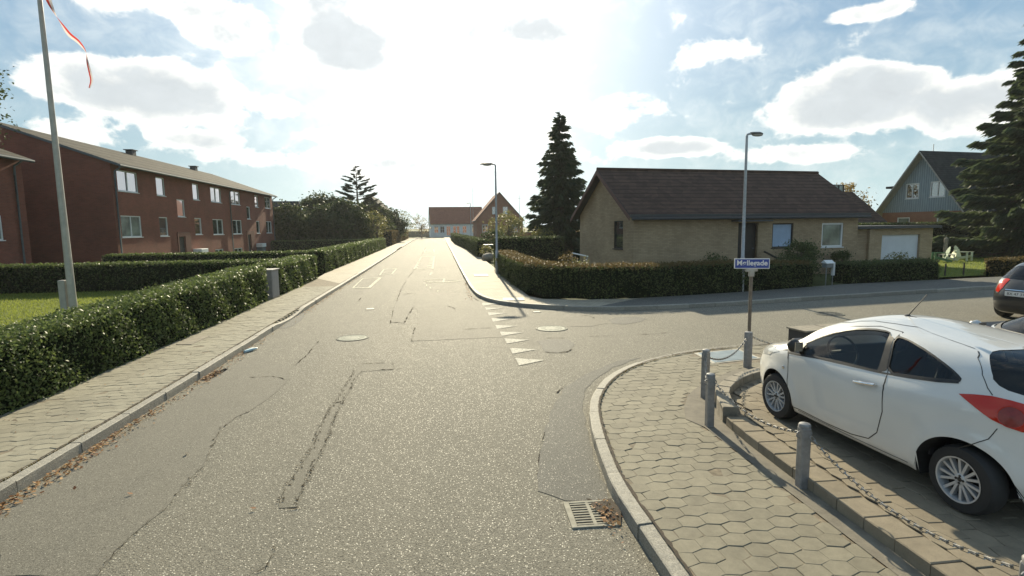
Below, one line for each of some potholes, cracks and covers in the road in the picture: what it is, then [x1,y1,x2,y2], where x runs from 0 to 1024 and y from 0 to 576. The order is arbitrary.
drain grate [563,498,621,529]
